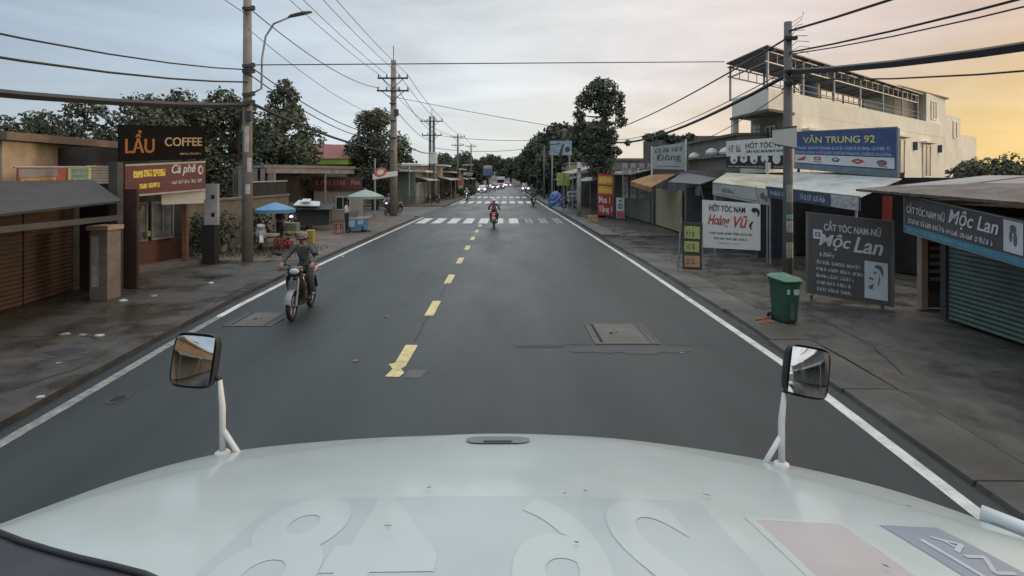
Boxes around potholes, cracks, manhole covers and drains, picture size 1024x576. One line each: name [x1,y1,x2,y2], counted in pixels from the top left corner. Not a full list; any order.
manhole cover [584,323,660,344]
manhole cover [222,312,293,327]
